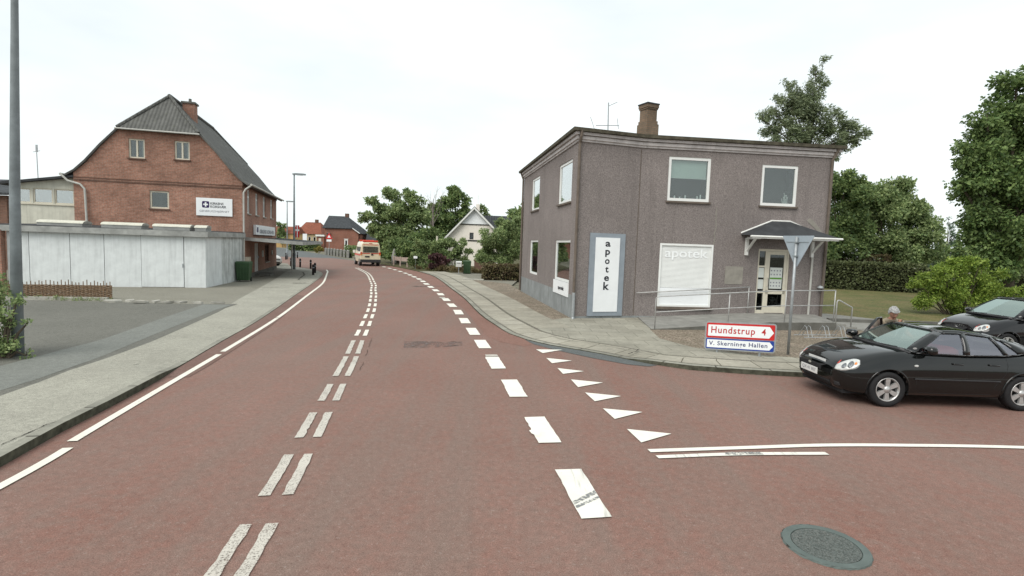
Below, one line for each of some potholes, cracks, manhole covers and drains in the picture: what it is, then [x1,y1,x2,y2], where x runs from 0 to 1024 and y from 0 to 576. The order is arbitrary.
manhole cover [781,524,874,570]
